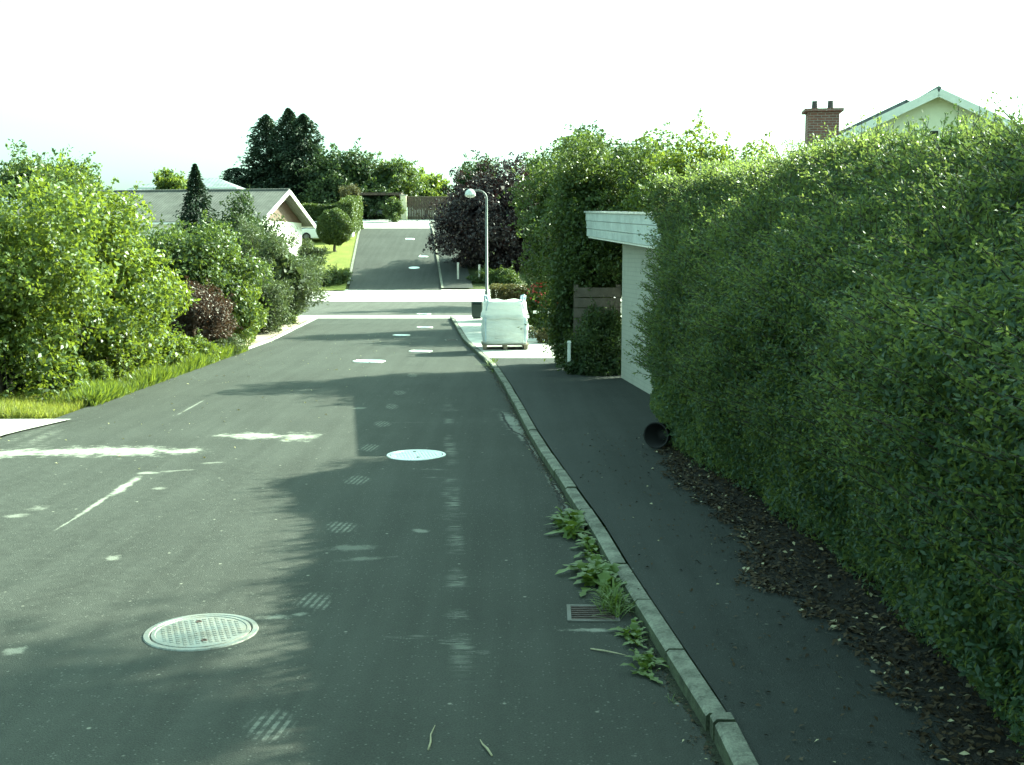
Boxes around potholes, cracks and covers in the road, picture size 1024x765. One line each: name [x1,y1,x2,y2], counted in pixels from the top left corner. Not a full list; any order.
manhole cover [386,449,446,460]
manhole cover [143,613,259,651]
drain grate [567,604,620,623]
